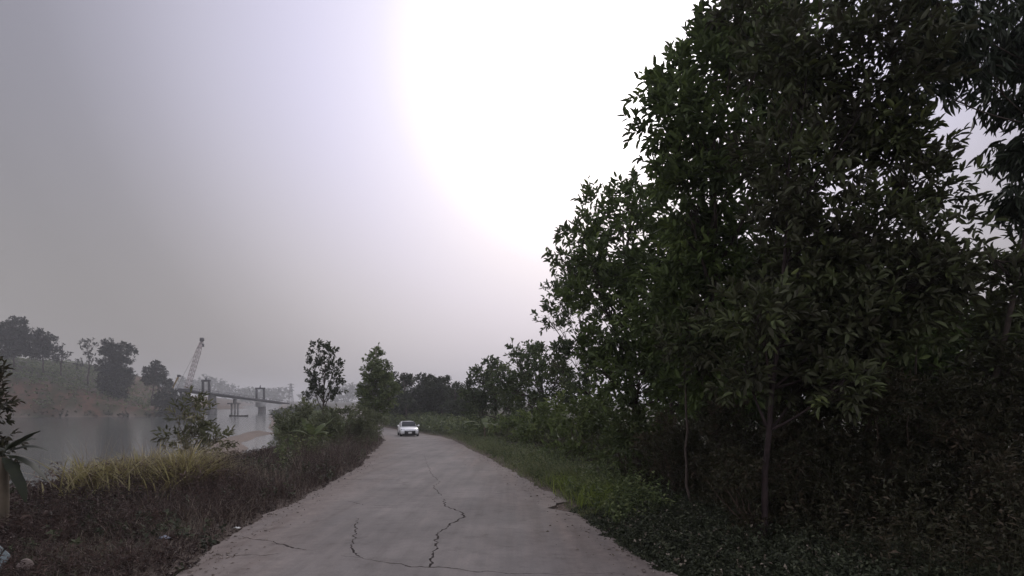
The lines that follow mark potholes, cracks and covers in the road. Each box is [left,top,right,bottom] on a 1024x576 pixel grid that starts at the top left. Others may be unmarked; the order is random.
crack [346,455,621,575]
crack [227,537,305,556]
